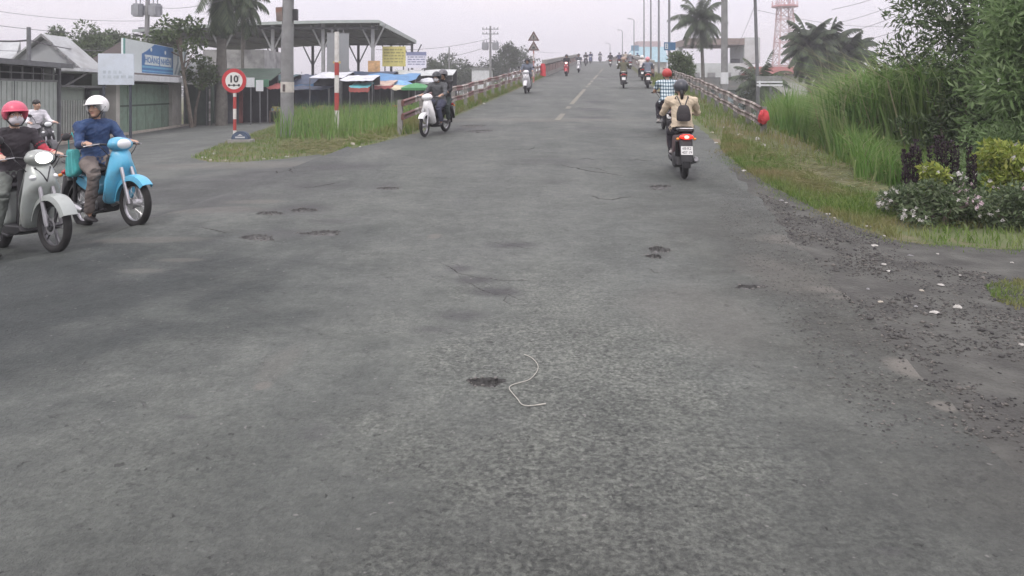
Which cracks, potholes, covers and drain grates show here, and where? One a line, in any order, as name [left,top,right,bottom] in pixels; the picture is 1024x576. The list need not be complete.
crack [441,263,542,304]
crack [515,148,653,177]
pothole [466,376,506,387]
pothole [648,245,673,253]
pothole [239,233,275,241]
